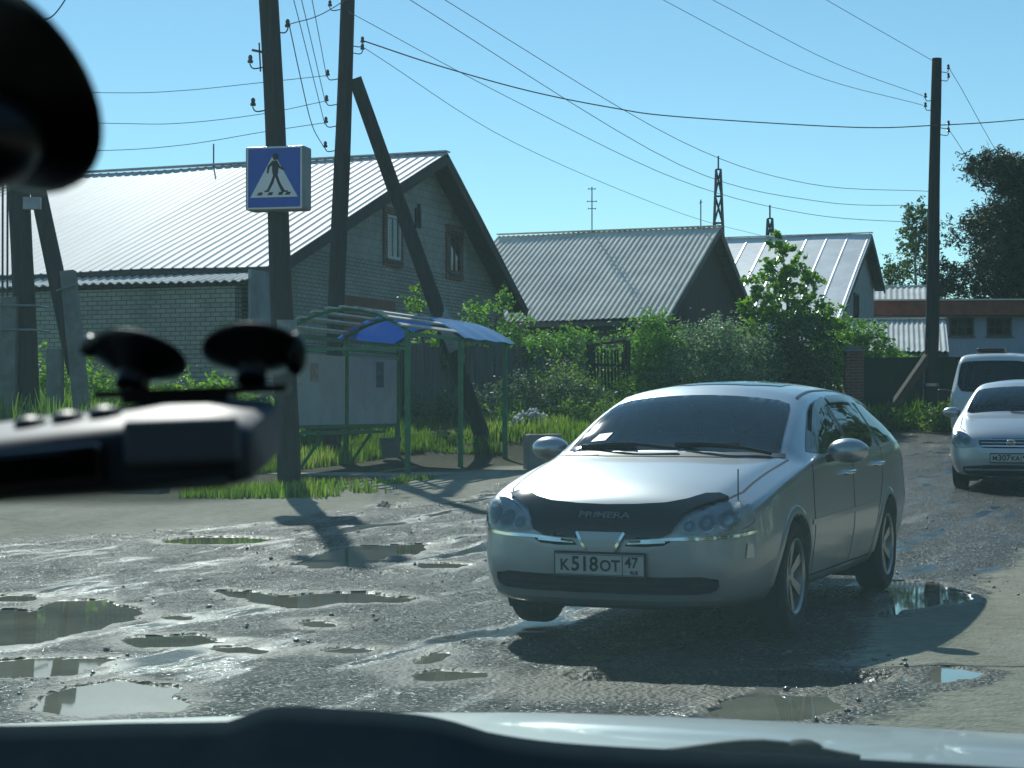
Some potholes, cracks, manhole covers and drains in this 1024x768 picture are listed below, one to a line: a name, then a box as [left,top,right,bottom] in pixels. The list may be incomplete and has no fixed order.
pothole [0,594,40,602]
pothole [896,665,989,685]
pothole [0,656,119,678]
pothole [388,650,458,669]
pothole [120,632,233,648]
pothole [28,678,194,718]
pothole [162,535,274,545]
pothole [285,543,427,569]
pothole [874,579,977,615]
pothole [215,589,421,608]
pothole [407,668,492,681]
pothole [209,644,272,654]
